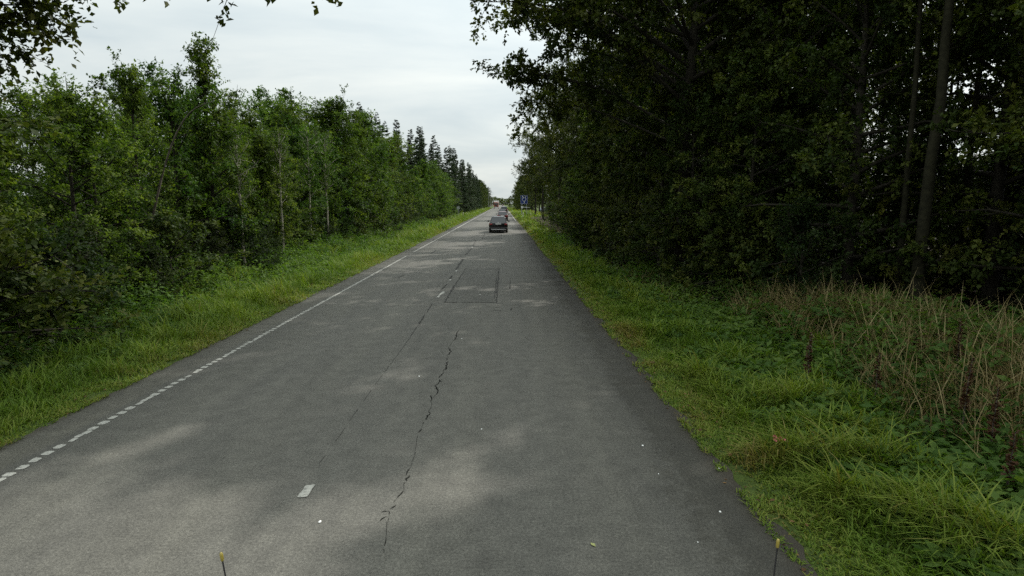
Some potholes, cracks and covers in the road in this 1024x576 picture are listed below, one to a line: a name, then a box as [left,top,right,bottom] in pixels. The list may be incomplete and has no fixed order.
crack [380,332,458,553]
crack [444,268,513,311]
